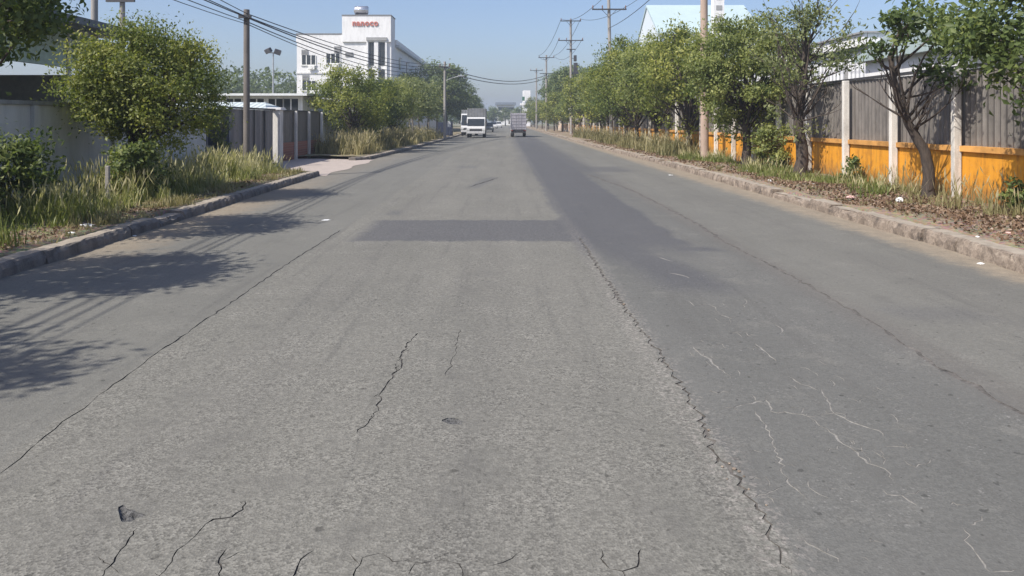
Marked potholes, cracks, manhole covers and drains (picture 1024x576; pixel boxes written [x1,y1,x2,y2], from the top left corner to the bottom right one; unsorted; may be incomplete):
crack [99,529,136,576]
pothole [118,505,147,522]
crack [357,333,418,432]
crack [1,231,339,473]
crack [155,502,247,576]
crack [600,549,641,576]
crack [350,553,465,576]
